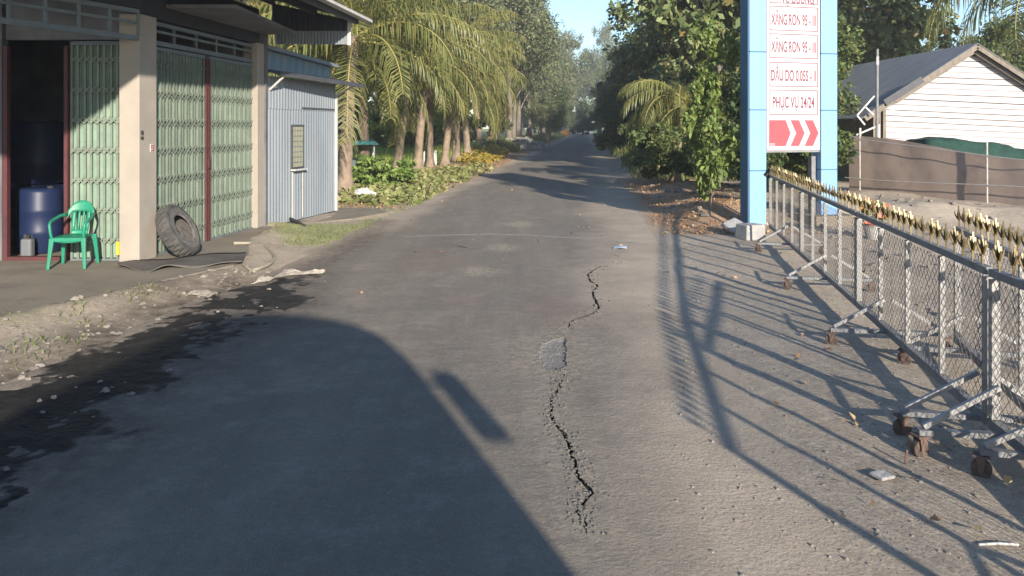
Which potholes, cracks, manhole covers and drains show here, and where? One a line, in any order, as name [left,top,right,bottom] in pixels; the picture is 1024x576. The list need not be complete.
crack [534,367,611,536]
crack [558,266,611,329]
